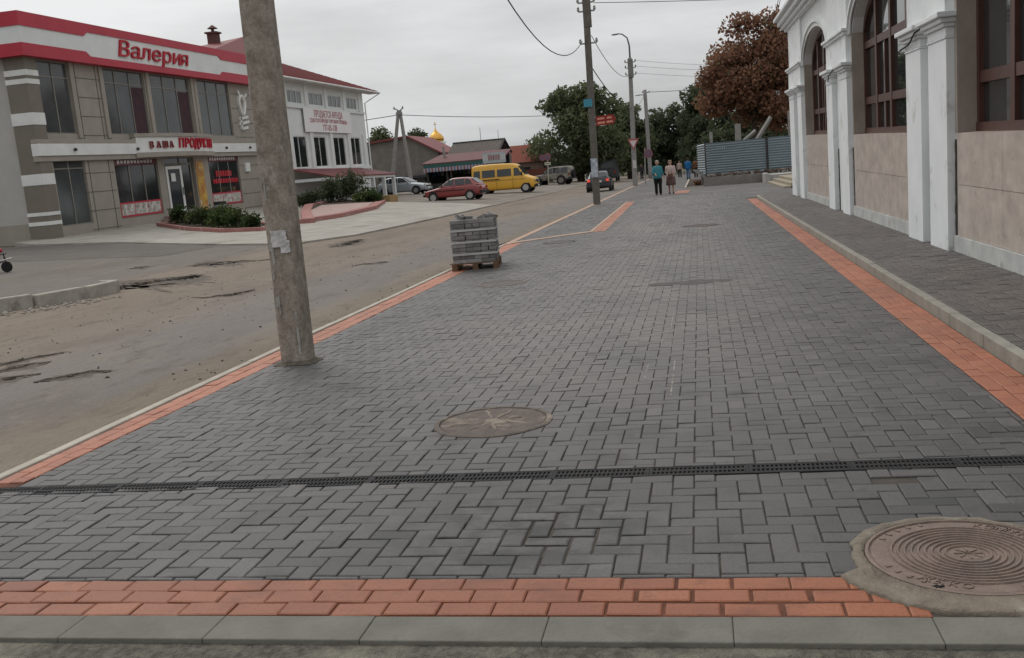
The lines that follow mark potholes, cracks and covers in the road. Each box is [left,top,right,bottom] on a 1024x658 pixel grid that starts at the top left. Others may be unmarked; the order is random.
manhole cover [433,406,553,439]
manhole cover [841,516,1024,617]
pothole [119,274,218,292]
